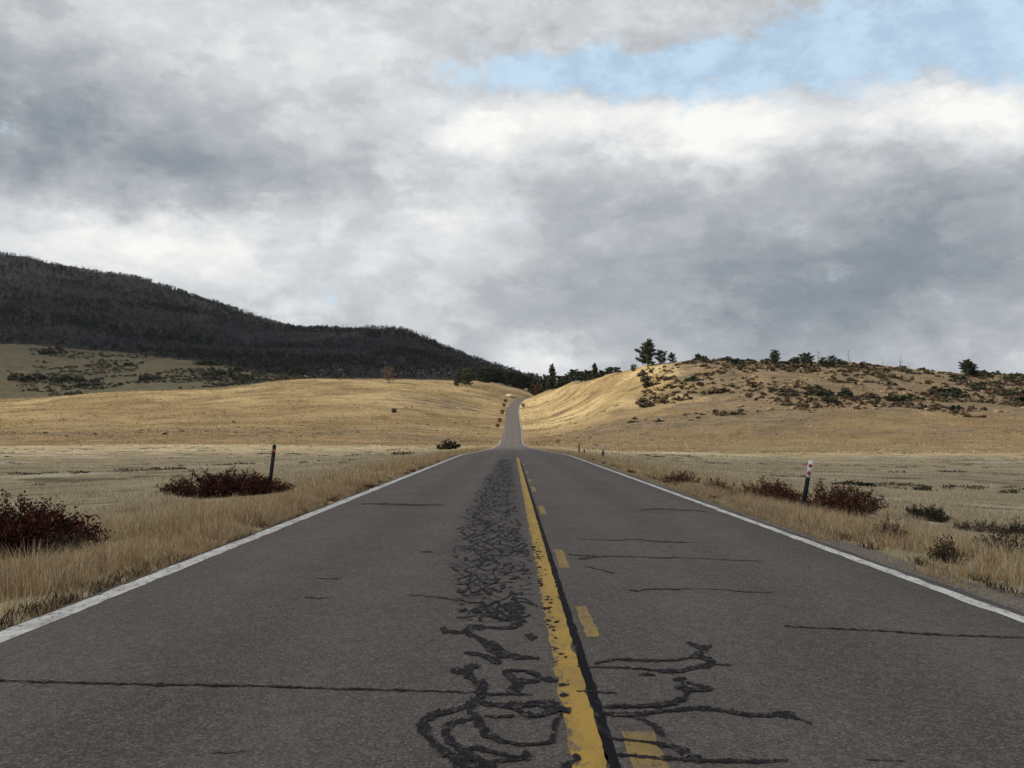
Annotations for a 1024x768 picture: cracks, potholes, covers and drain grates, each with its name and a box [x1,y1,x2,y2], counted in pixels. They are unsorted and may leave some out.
crack [0,679,475,693]
crack [569,538,773,593]
crack [783,625,1024,638]
